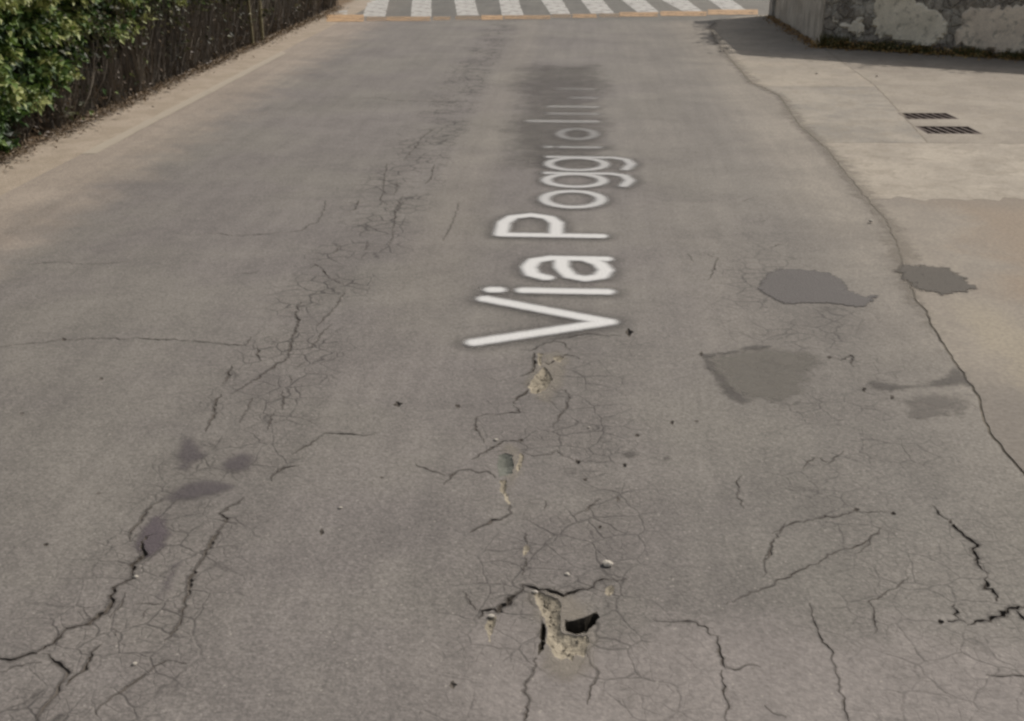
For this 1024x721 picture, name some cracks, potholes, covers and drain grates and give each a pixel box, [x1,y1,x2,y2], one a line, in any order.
pothole [497,453,514,477]
pothole [533,590,590,662]
crack [586,652,599,705]
drain grate [916,126,982,134]
crack [379,165,404,240]
crack [466,533,621,618]
crack [735,511,889,600]
crack [271,433,377,481]
pothole [528,367,553,394]
crack [205,246,345,432]
crack [935,508,1024,625]
crack [4,338,248,347]
